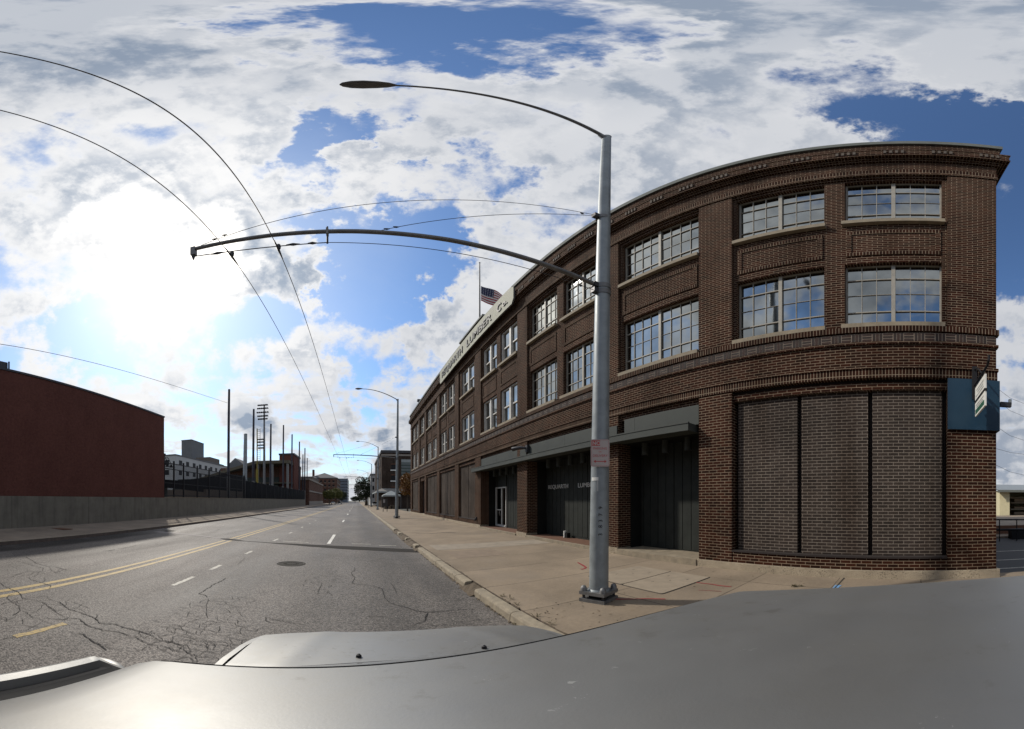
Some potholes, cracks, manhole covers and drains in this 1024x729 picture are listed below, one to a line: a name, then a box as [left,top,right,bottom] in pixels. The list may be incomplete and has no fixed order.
utility cover [622,572,710,594]
crack [303,558,443,625]
crack [0,558,264,662]
